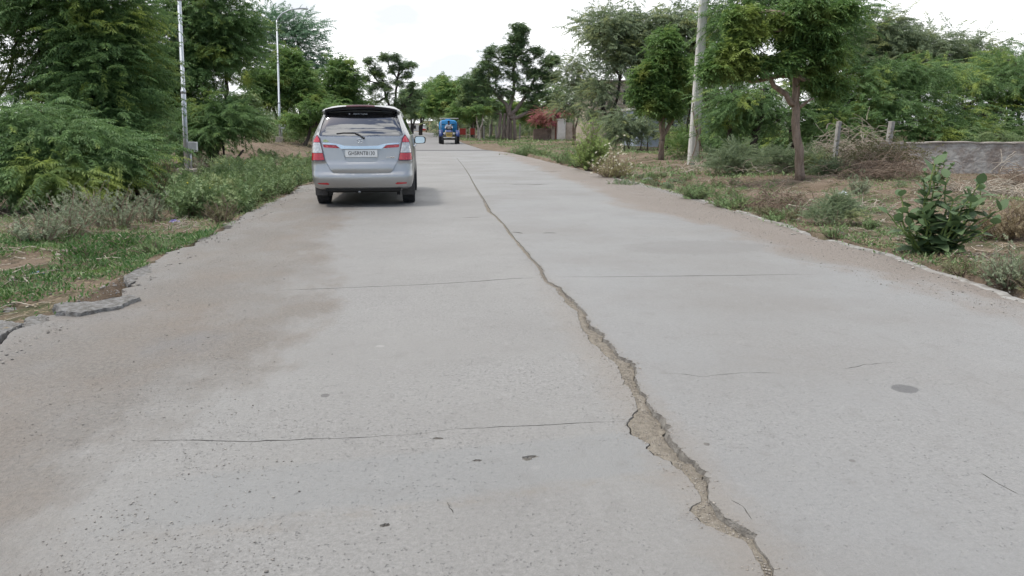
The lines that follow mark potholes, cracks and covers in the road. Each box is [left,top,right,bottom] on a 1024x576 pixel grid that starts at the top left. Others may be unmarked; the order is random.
crack [159,160,783,576]
